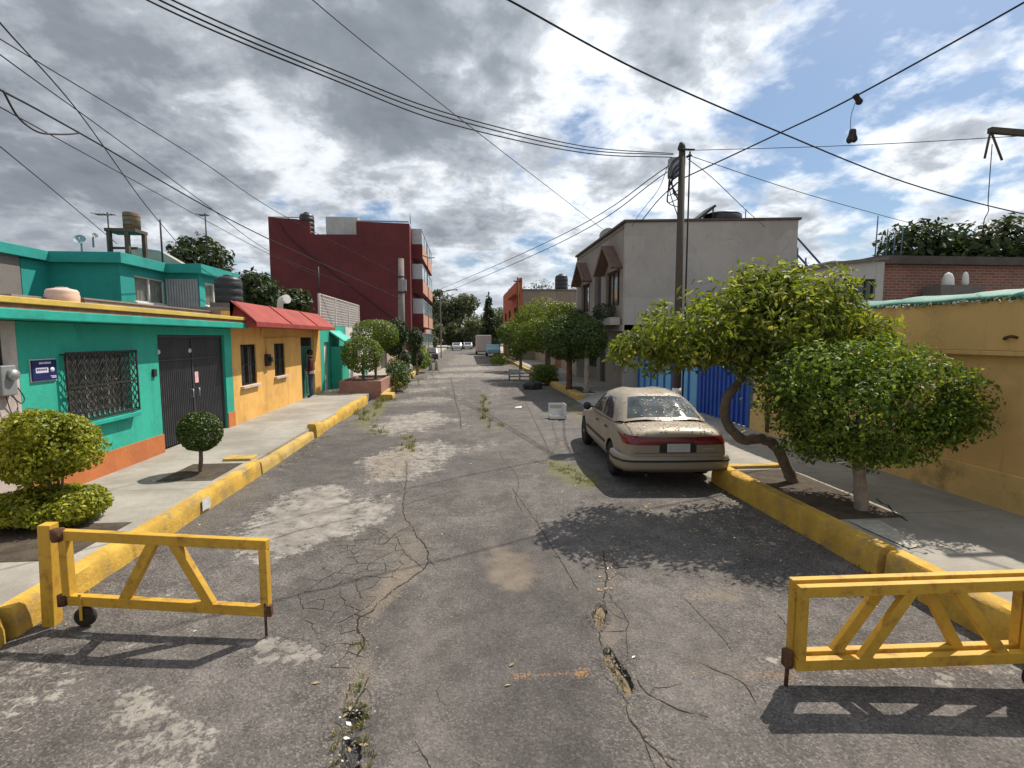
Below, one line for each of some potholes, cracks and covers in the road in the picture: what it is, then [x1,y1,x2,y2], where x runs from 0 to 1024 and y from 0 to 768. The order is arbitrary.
pothole [586,599,612,632]
pothole [598,644,639,703]
crack [280,463,452,733]
crack [685,599,755,701]
crack [499,451,708,768]
